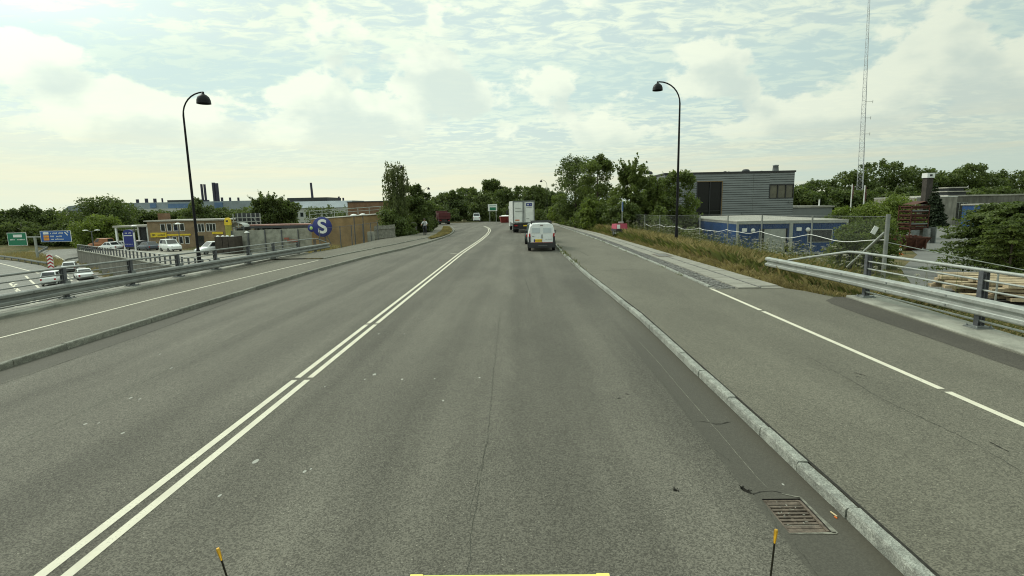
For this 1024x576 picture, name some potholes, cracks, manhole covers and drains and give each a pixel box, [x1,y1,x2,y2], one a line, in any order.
crack [649,368,740,484]
drain grate [762,493,838,534]
crack [467,317,500,575]
